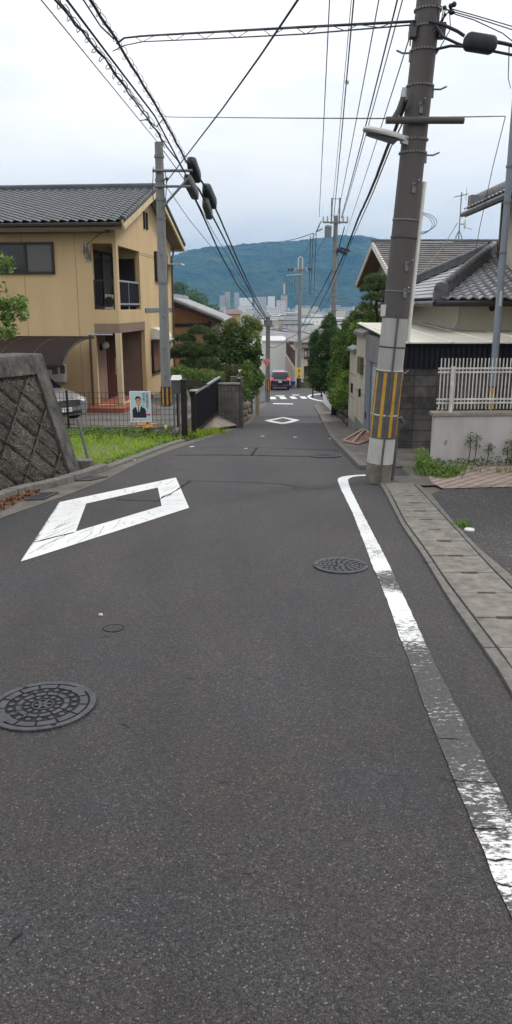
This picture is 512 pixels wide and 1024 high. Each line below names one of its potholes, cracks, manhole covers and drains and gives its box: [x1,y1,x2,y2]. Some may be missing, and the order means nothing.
manhole cover [0,681,96,733]
manhole cover [314,557,368,574]
manhole cover [103,624,124,632]
